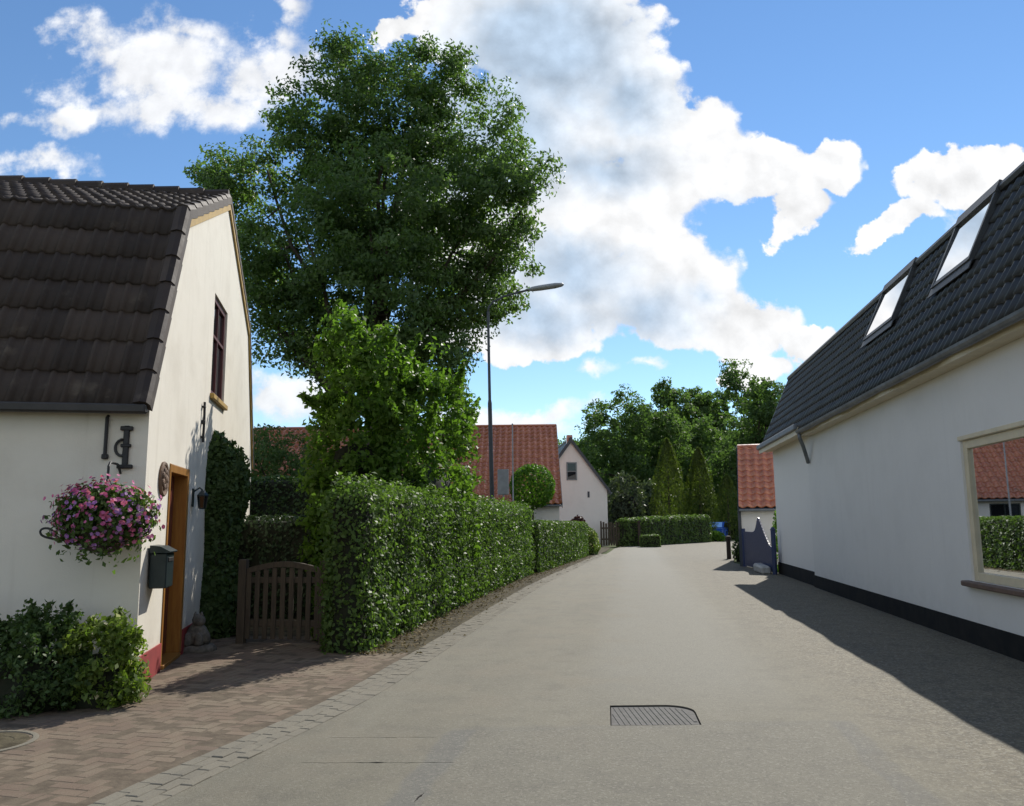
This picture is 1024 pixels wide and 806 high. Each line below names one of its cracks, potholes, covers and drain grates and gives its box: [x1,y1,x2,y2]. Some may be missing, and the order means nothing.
manhole cover [0,730,39,752]
